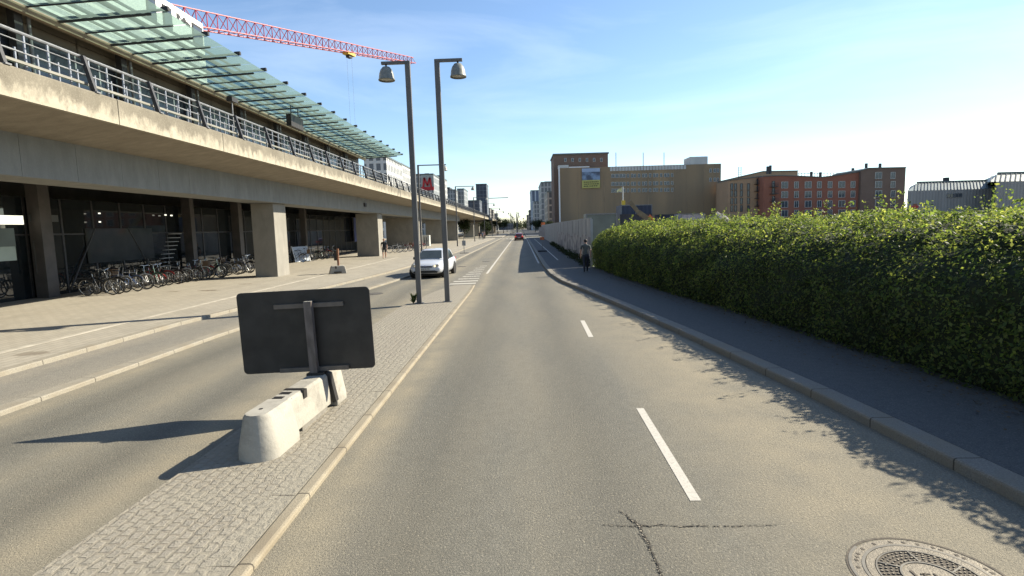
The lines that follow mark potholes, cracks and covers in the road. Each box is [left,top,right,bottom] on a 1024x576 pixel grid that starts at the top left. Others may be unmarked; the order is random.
crack [602,511,777,576]
manhole cover [846,537,1006,576]
